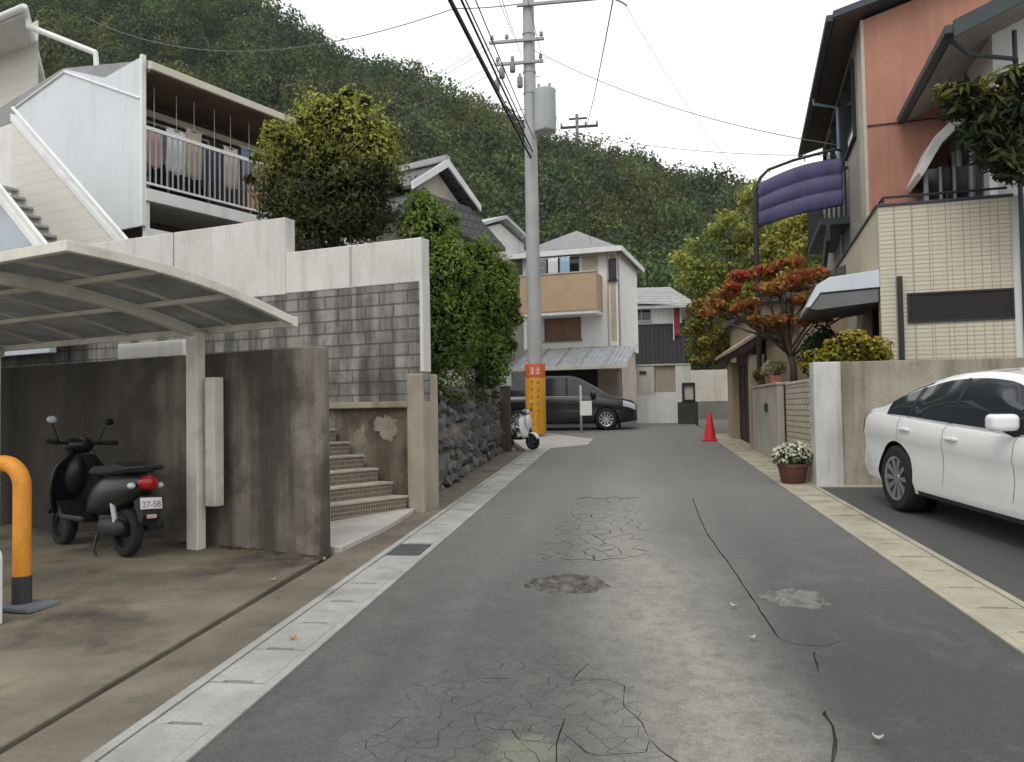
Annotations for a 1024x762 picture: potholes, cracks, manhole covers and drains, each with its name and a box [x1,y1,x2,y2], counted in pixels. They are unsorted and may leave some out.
crack [692,497,838,674]
pothole [524,574,610,594]
crack [822,711,837,762]
crack [535,496,649,562]
crack [340,655,678,762]
drain grate [386,544,432,556]
